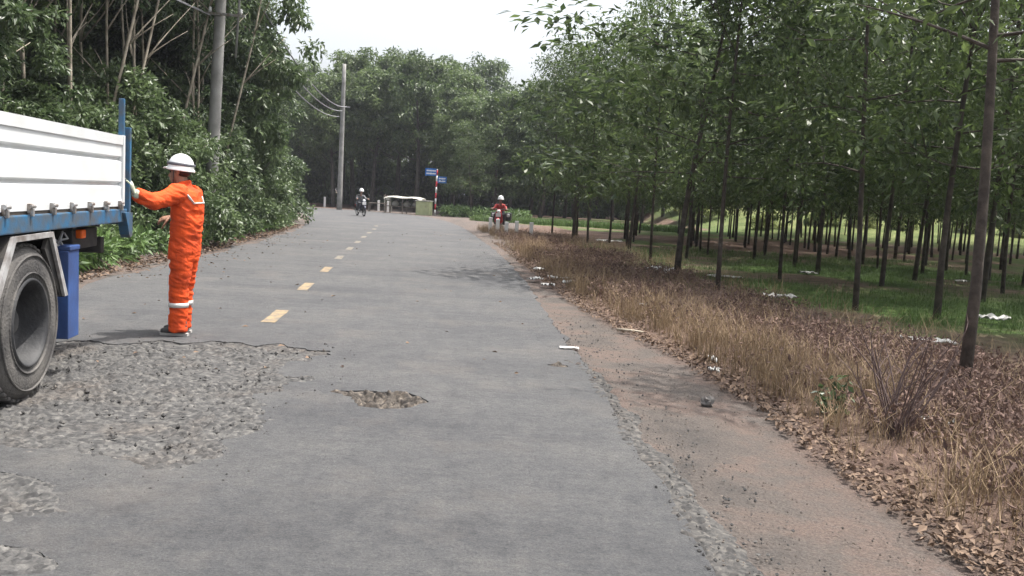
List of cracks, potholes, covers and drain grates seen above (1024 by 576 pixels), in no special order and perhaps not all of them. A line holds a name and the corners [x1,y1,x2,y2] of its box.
pothole [331,389,428,409]
